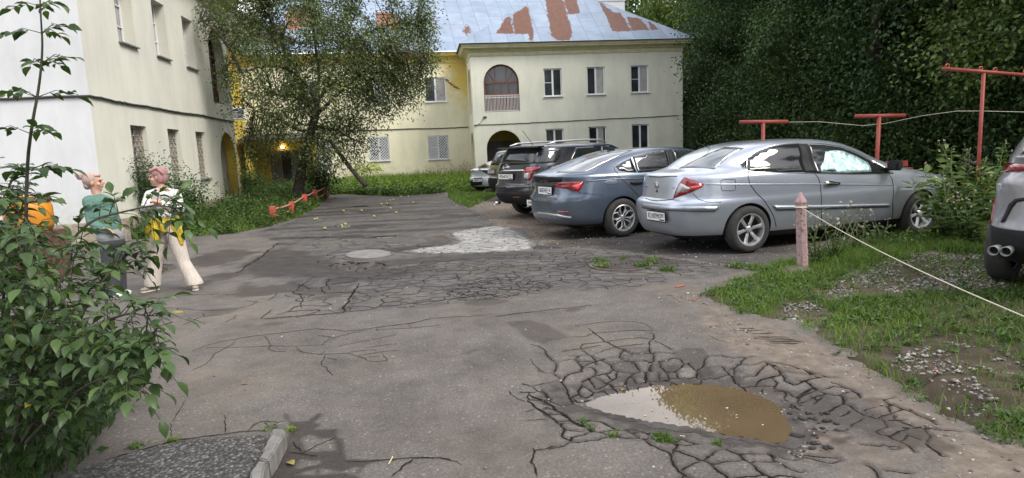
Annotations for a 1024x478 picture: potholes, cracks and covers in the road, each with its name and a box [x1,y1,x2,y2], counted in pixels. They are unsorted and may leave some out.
crack [166,225,958,478]
manhole cover [342,249,395,260]
pothole [574,378,810,449]
